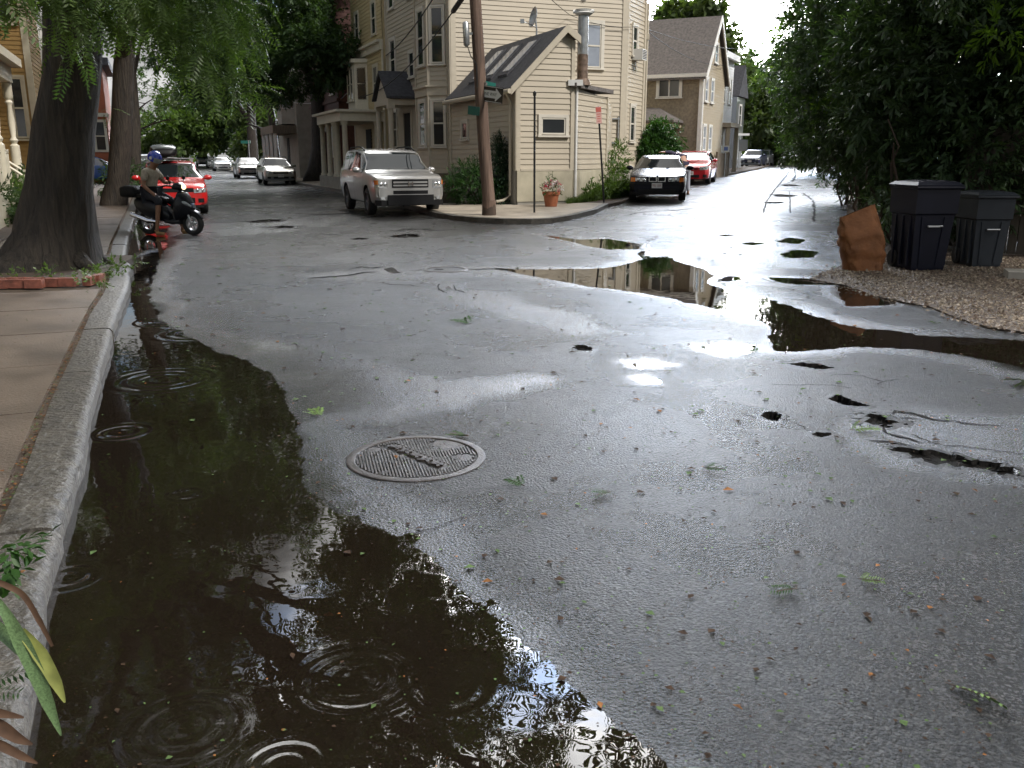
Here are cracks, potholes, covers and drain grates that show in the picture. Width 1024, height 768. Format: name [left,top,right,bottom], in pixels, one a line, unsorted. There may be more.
pothole [849,410,914,430]
manhole cover [346,436,486,482]
pothole [752,410,790,424]
pothole [567,344,599,352]
pothole [820,393,877,409]
crack [871,410,1023,454]
pothole [779,361,840,371]
pothole [880,443,1024,480]
pothole [804,430,840,440]
crack [763,172,816,222]
